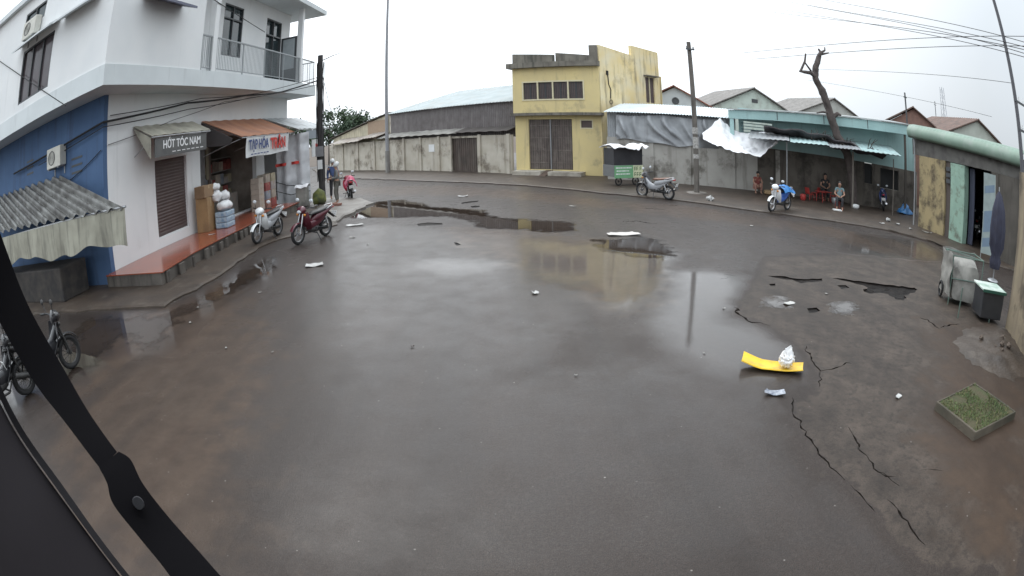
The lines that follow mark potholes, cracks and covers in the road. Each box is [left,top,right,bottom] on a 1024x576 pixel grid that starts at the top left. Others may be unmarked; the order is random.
pothole [833,278,917,300]
crack [791,346,925,545]
